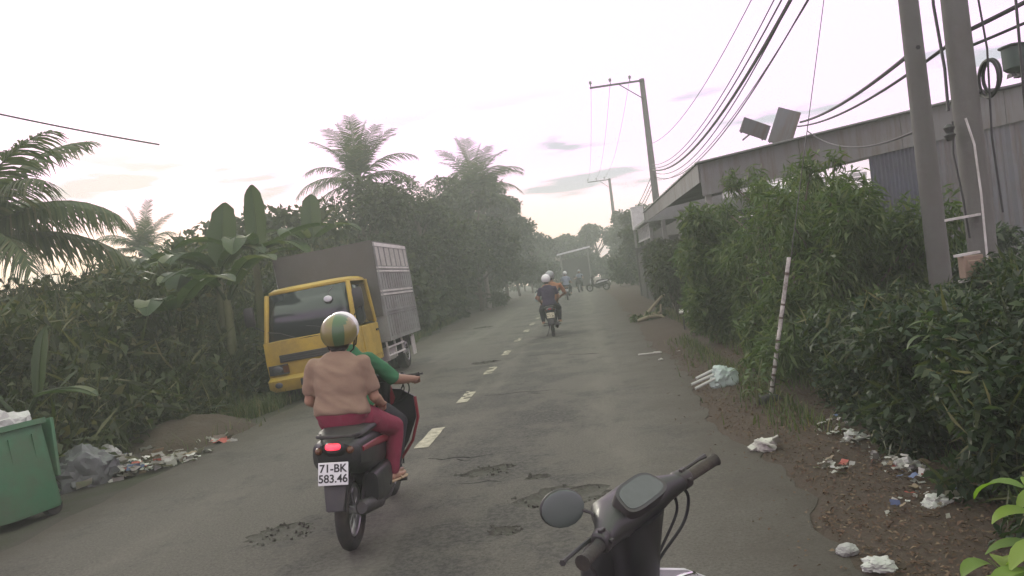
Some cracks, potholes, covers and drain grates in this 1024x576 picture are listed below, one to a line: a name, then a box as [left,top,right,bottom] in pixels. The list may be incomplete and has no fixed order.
pothole [507,484,611,509]
pothole [454,463,516,479]
pothole [487,525,523,536]
pothole [244,521,315,546]
